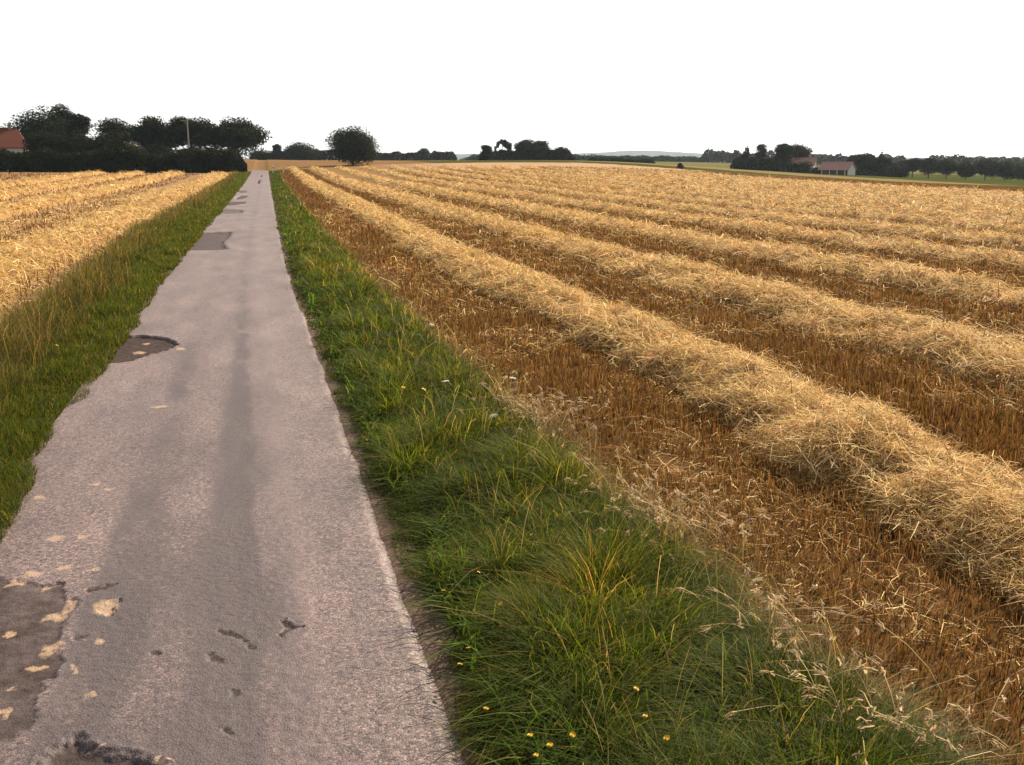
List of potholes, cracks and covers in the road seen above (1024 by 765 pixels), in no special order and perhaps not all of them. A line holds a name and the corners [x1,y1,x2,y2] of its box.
pothole [83,582,120,593]
pothole [214,628,257,651]
pothole [202,651,230,666]
pothole [28,728,174,765]
pothole [109,334,180,363]
